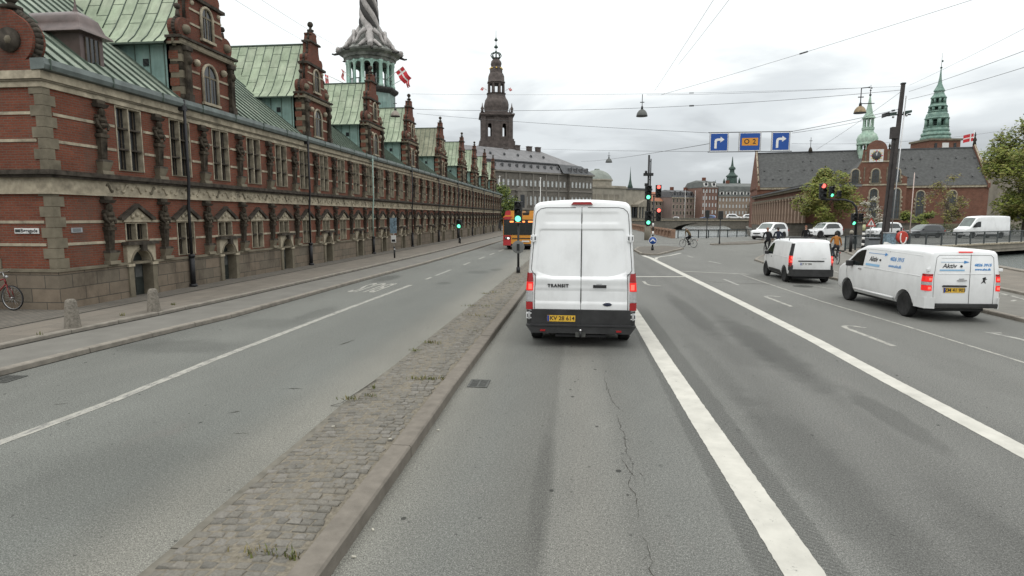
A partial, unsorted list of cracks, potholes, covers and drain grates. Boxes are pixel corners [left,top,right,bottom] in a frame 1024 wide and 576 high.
drain grate [467,379,491,388]
drain grate [0,375,28,383]
crack [604,378,654,576]
